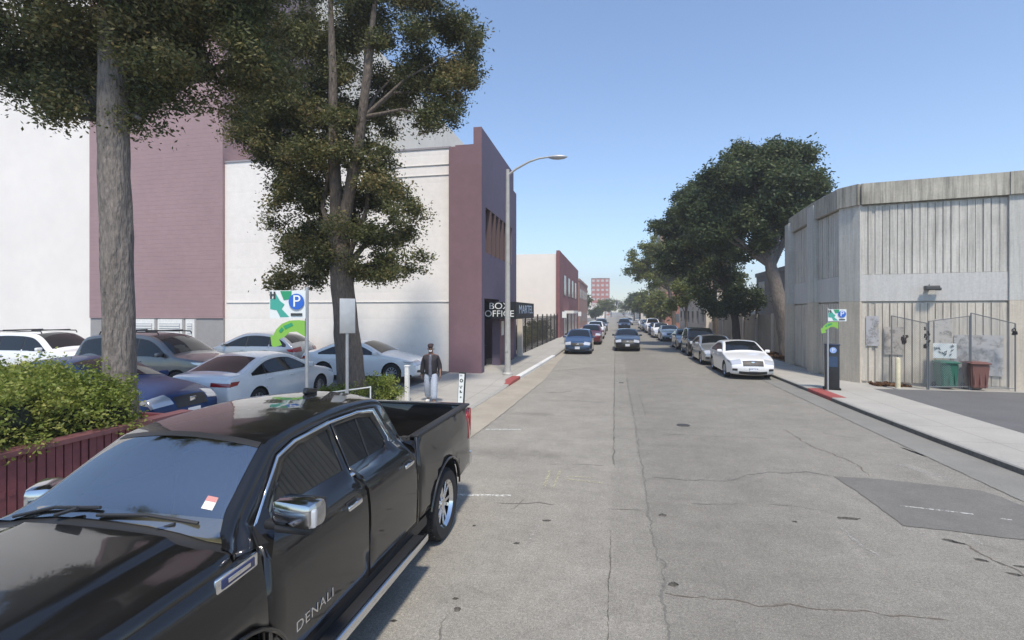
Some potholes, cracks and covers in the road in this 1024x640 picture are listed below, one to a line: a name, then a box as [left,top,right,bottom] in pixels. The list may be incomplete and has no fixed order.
crack [966,544,1024,576]
